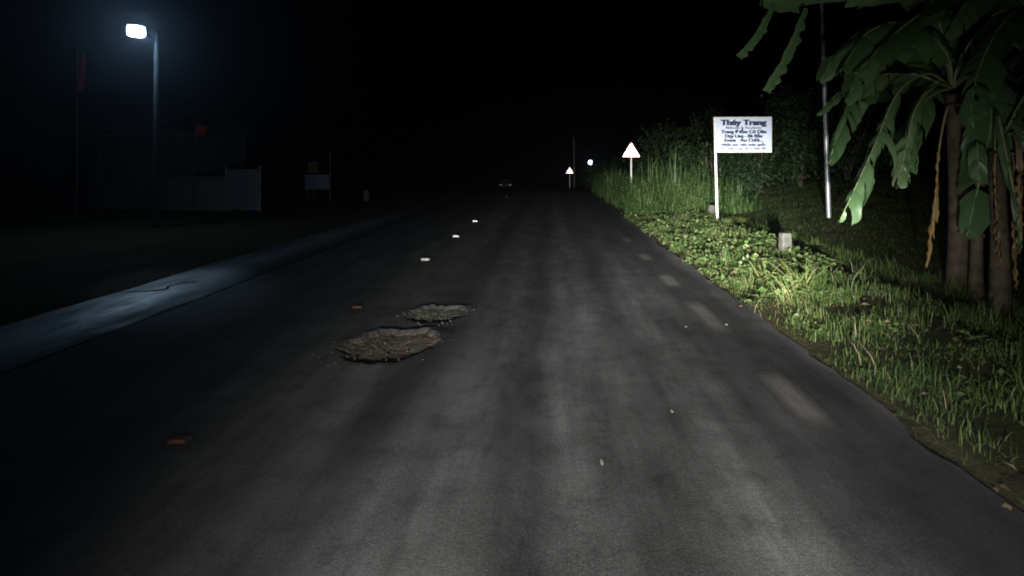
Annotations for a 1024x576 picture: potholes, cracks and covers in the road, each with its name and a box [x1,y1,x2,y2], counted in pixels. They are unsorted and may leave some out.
crack [129,282,190,292]
pothole [315,326,459,372]
pothole [392,304,477,326]
